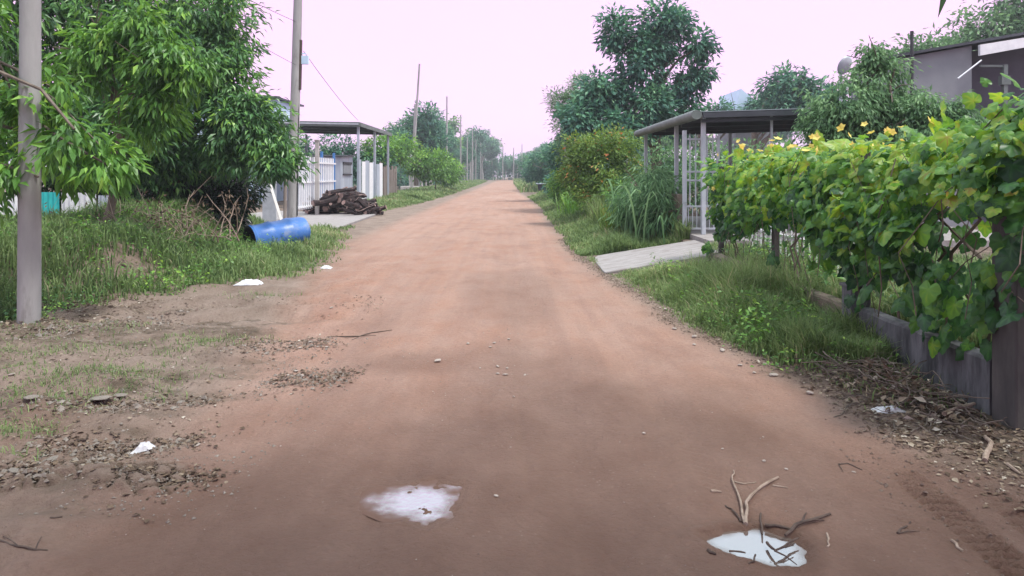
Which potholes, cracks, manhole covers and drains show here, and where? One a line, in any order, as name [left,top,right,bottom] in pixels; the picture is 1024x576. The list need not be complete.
pothole [684,521,827,573]
pothole [343,473,478,533]
